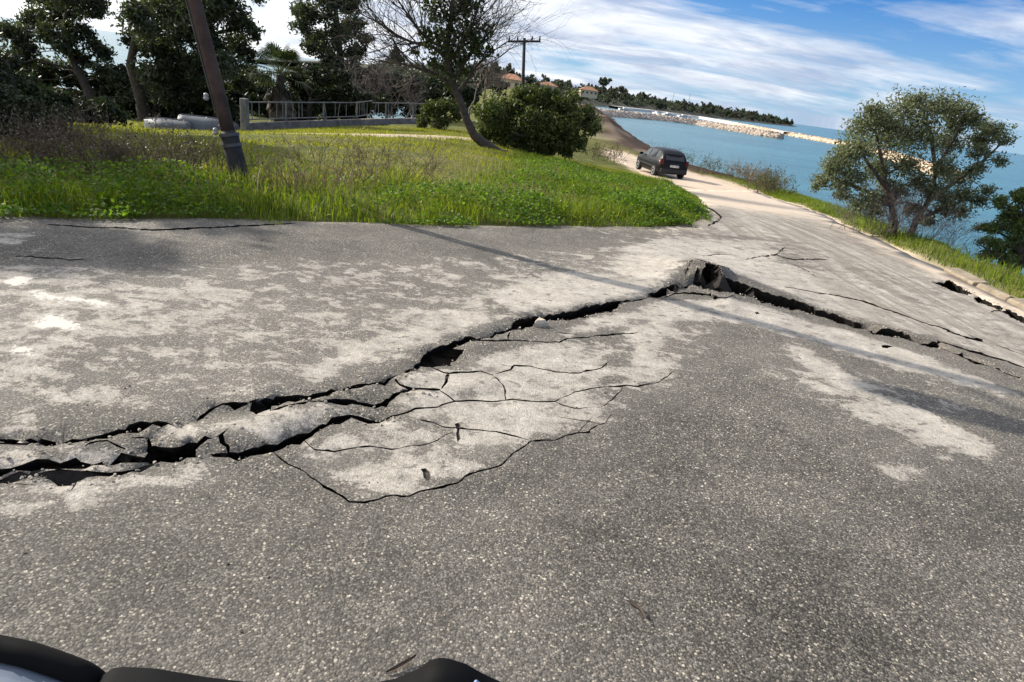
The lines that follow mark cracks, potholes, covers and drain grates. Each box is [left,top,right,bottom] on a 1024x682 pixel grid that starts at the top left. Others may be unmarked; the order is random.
crack [48,223,293,231]
crack [471,248,1024,378]
crack [0,361,672,503]
